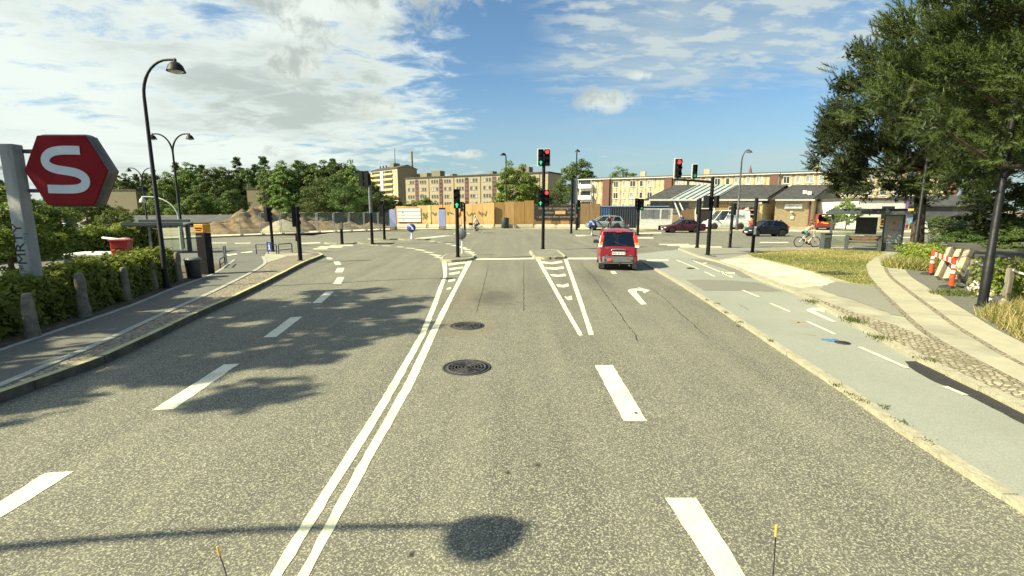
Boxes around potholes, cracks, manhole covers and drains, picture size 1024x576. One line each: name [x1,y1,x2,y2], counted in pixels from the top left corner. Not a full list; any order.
manhole cover [450,321,484,330]
manhole cover [442,359,491,376]
crack [582,265,638,341]
